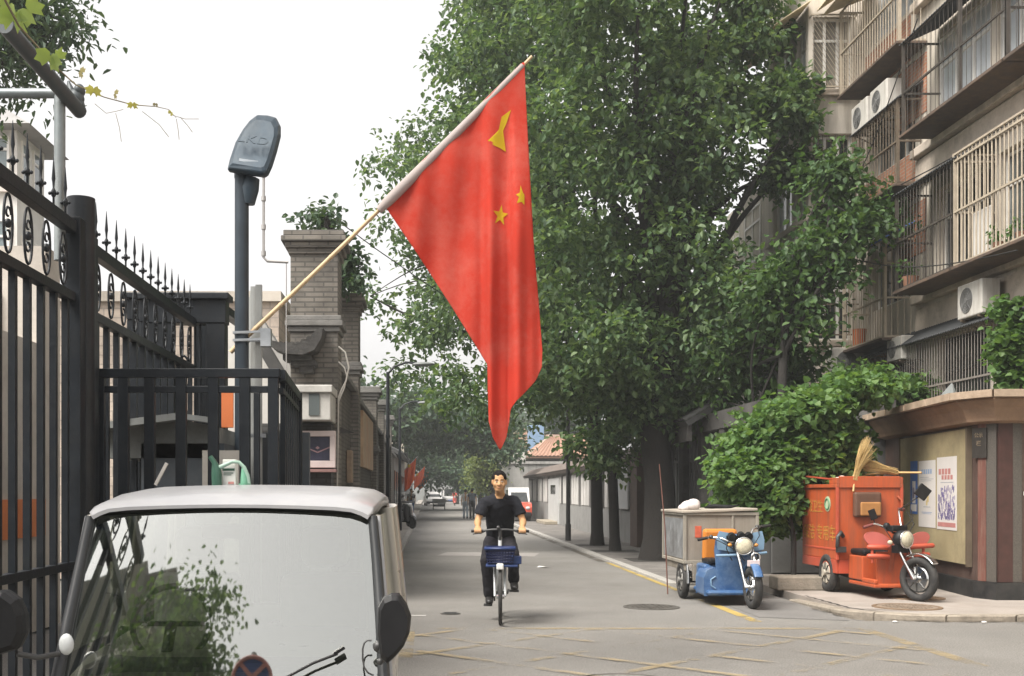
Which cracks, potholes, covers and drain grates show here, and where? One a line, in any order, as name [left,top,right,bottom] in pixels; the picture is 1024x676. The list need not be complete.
manhole cover [871,603,943,611]
